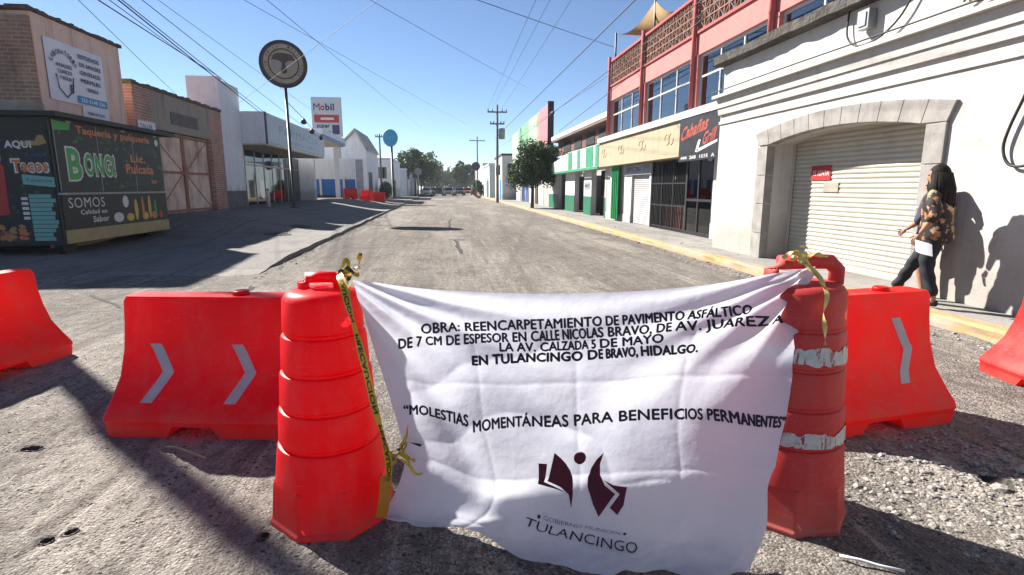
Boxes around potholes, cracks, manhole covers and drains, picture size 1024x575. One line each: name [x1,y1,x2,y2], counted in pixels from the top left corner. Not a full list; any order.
pothole [975,474,1017,492]
pothole [39,536,56,546]
